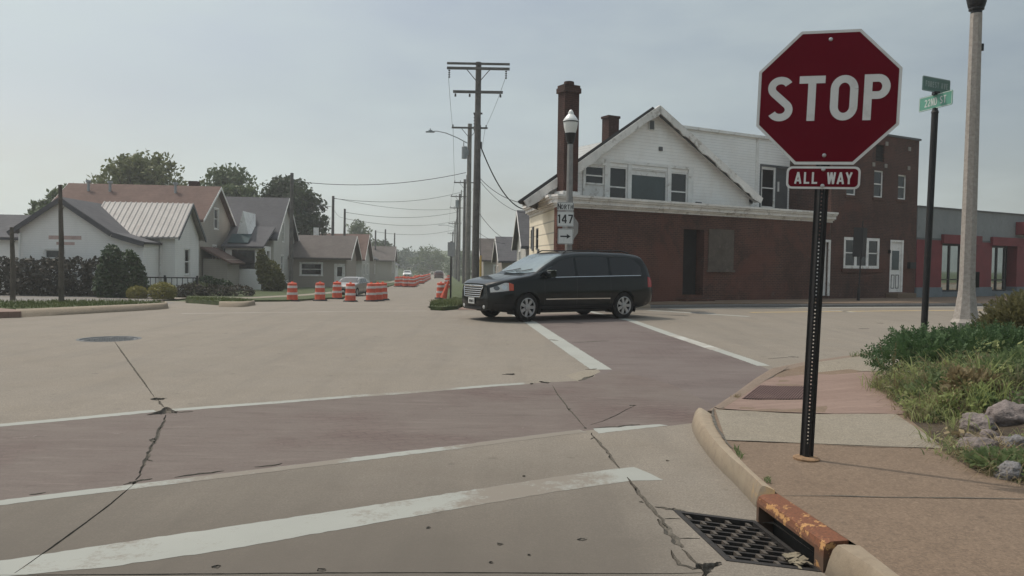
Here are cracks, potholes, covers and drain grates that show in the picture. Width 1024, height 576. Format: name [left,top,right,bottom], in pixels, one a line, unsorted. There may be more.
pothole [148,407,179,415]
crack [15,344,193,573]
drain grate [673,494,849,573]
crack [552,369,703,571]
